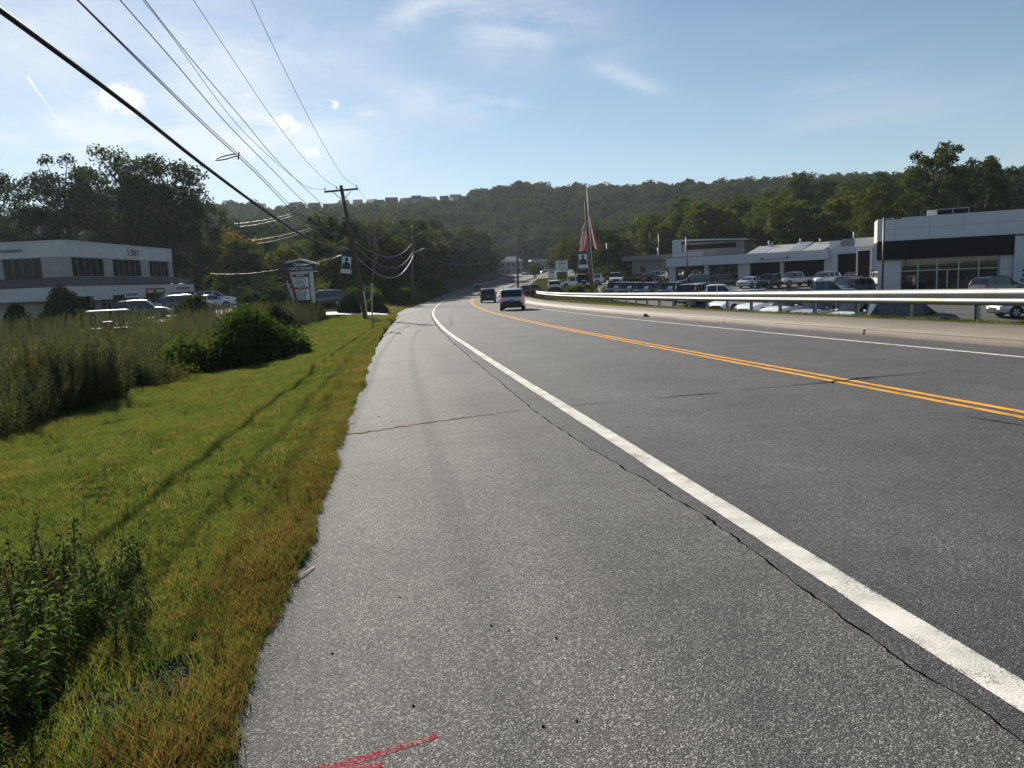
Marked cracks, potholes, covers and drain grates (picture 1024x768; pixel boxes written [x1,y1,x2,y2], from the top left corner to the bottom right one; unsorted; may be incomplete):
crack [347,314,1024,743]
